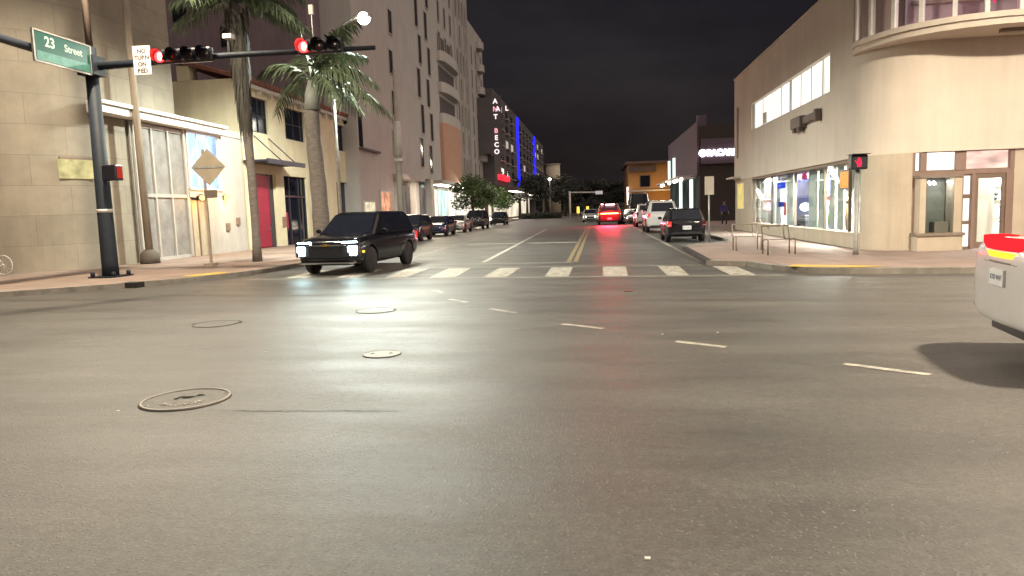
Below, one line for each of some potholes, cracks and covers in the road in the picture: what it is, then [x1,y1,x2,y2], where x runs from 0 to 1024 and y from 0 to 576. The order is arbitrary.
manhole cover [191,320,242,328]
manhole cover [137,388,232,412]
manhole cover [363,350,401,358]
